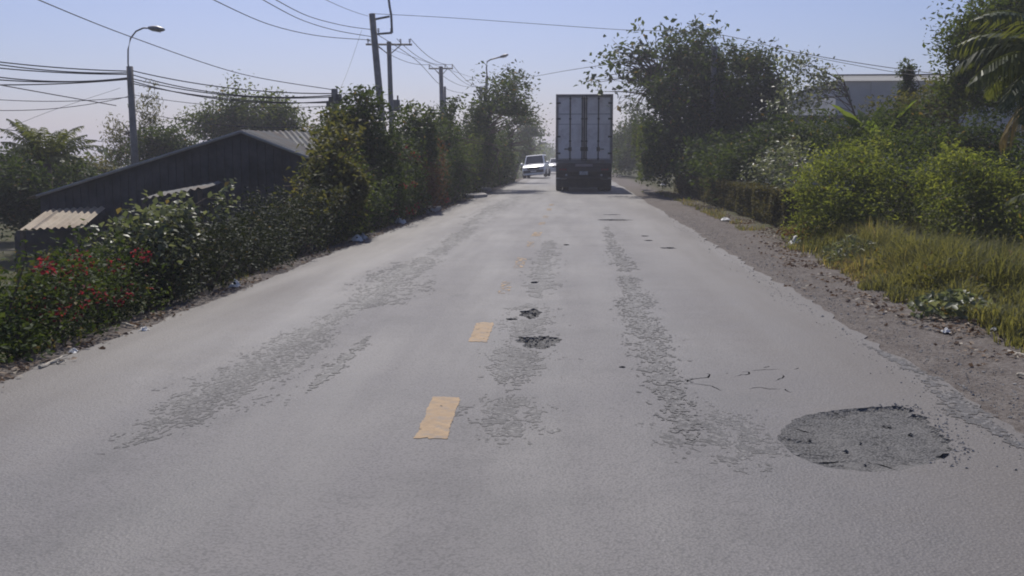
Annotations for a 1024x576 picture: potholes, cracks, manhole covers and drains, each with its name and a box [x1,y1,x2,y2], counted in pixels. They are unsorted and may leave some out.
pothole [777,406,954,472]
crack [687,366,798,393]
pothole [519,308,543,319]
pothole [514,335,562,349]
